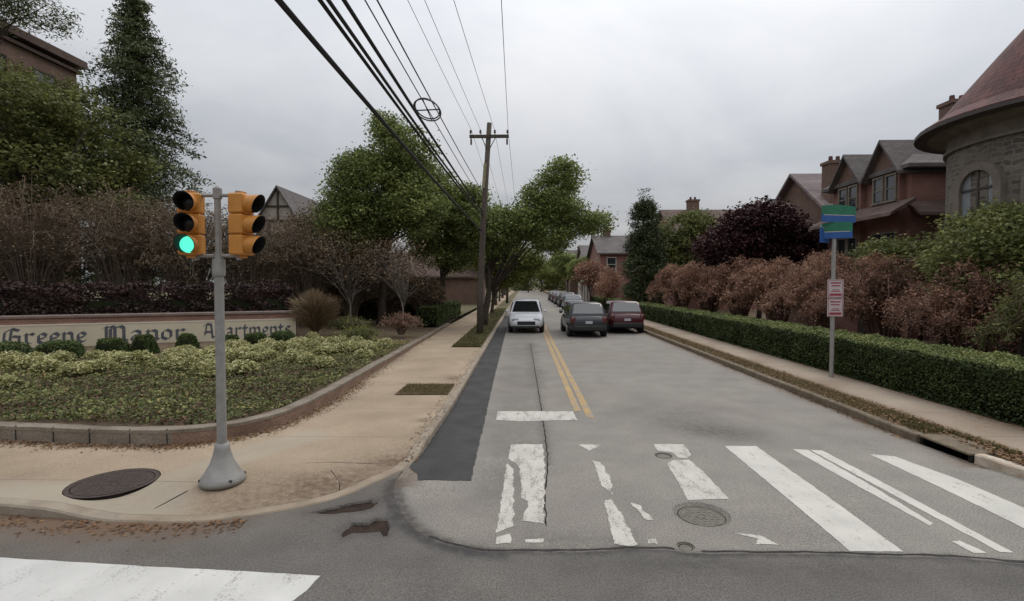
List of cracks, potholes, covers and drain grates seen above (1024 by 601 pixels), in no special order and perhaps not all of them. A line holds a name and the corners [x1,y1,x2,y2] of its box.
pothole [310,499,378,514]
manhole cover [676,542,695,551]
manhole cover [672,502,731,527]
manhole cover [63,468,160,500]
crack [530,343,549,526]
drain grate [919,434,1003,463]
pothole [340,518,391,538]
